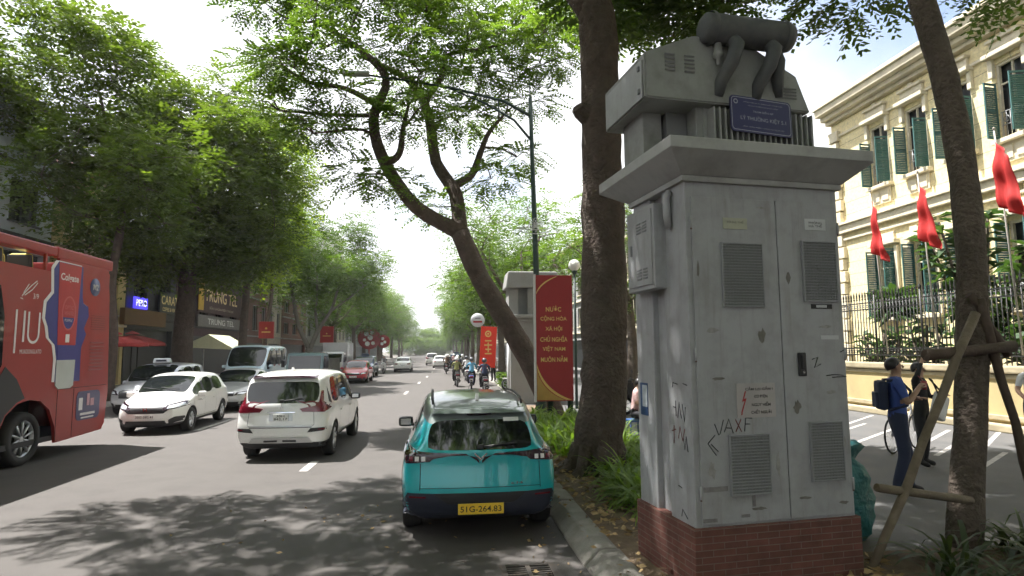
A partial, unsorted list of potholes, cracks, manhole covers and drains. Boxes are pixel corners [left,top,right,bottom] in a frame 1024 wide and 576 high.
drain grate [499,562,560,576]
